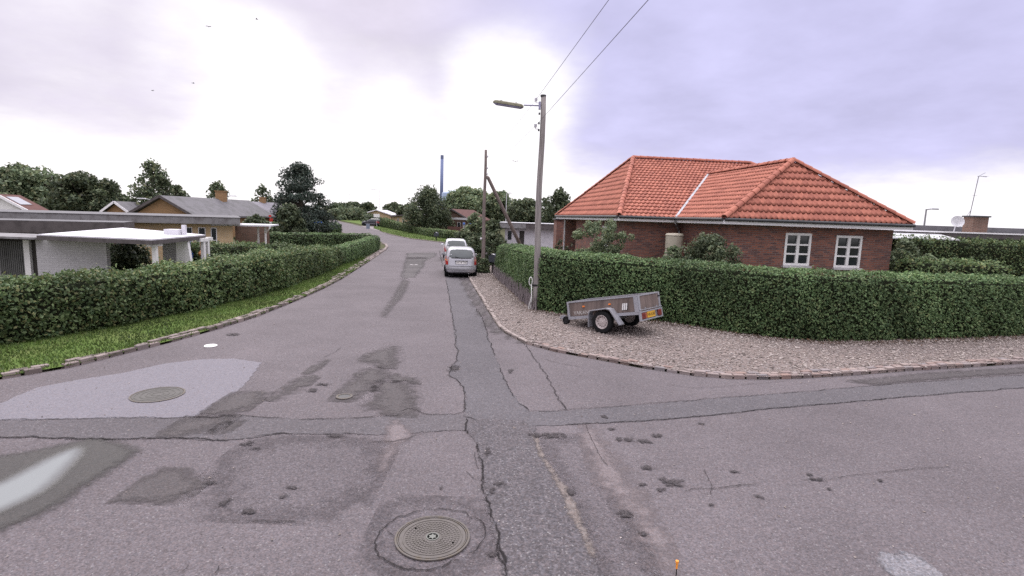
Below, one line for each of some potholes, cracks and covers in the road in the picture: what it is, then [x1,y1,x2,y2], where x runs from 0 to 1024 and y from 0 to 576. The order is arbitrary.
crack [476,308,1024,461]
manhole cover [129,387,186,403]
manhole cover [394,516,470,561]
crack [0,280,508,576]
